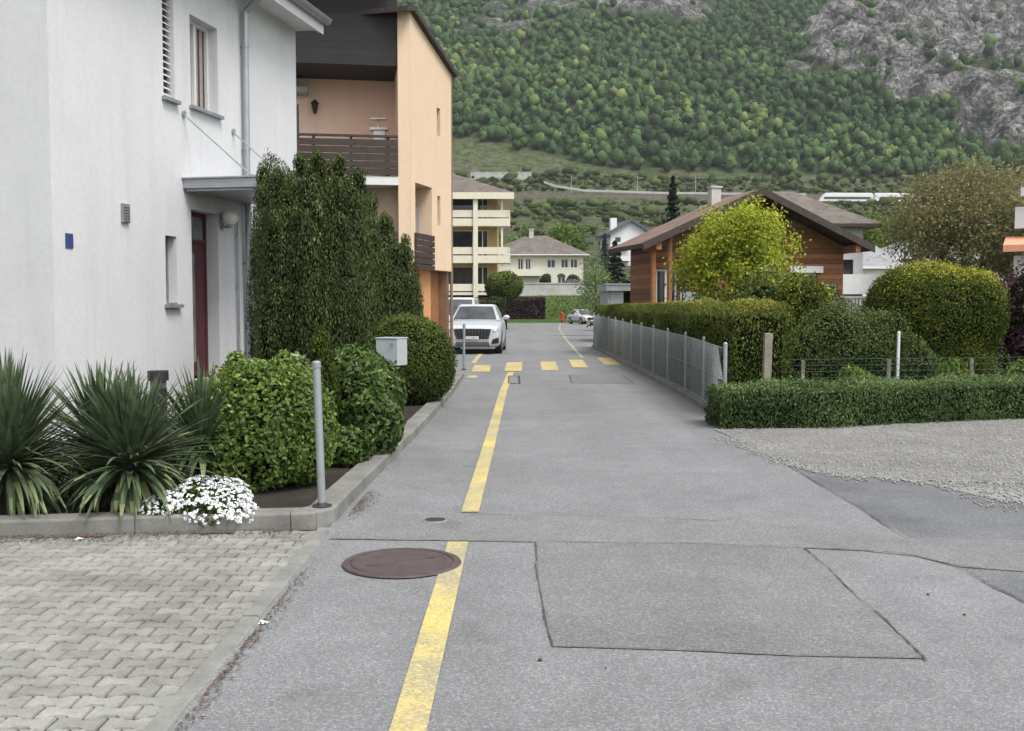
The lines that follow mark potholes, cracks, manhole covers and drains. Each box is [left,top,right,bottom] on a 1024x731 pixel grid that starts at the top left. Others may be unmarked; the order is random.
manhole cover [342,548,461,578]
